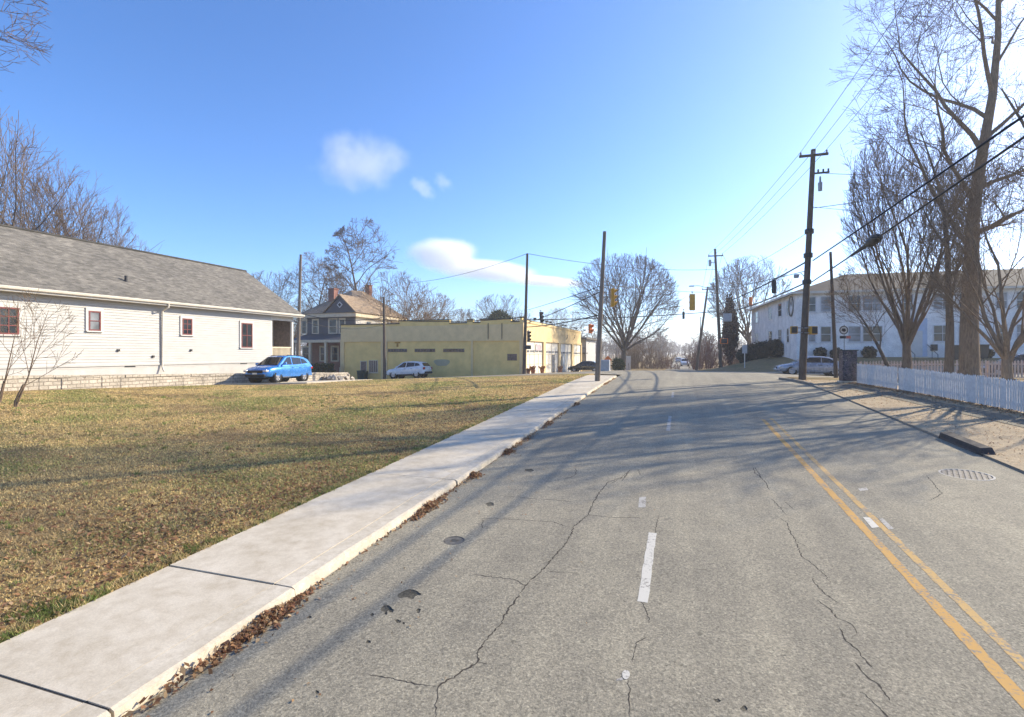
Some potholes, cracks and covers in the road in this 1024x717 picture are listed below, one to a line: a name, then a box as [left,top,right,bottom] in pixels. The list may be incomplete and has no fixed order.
crack [753,467,890,717]
pothole [398,590,421,599]
crack [369,469,640,717]
